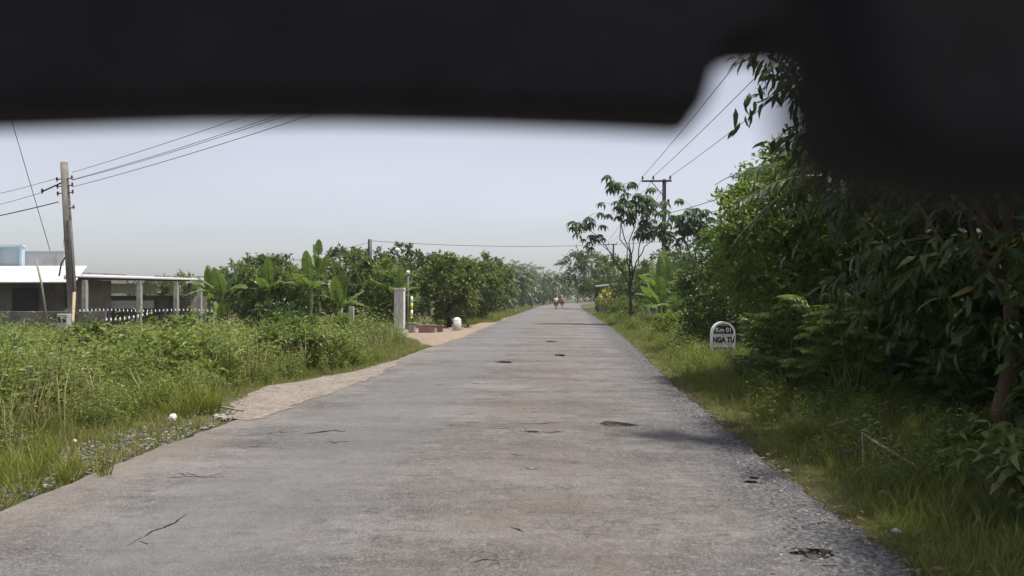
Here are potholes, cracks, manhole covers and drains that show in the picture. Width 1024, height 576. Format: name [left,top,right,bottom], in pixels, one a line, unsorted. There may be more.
pothole [789,548,835,559]
crack [247,429,348,447]
crack [127,514,187,546]
